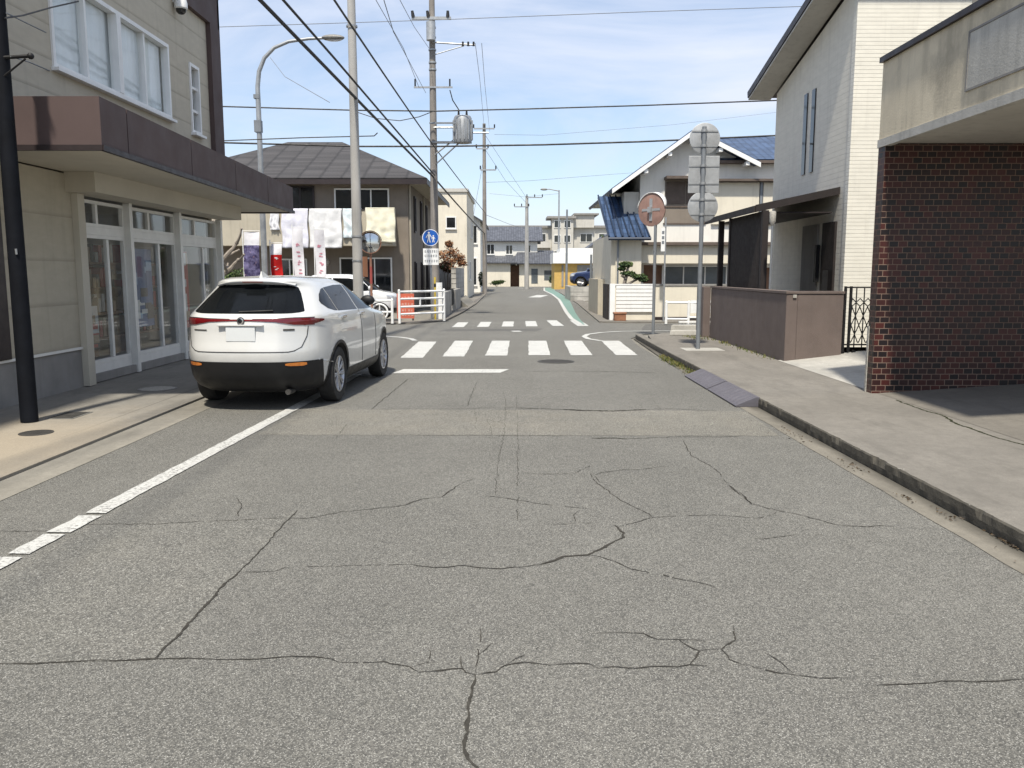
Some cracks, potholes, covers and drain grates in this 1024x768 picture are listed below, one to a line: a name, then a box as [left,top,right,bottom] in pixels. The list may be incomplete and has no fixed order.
crack [1,384,848,768]
